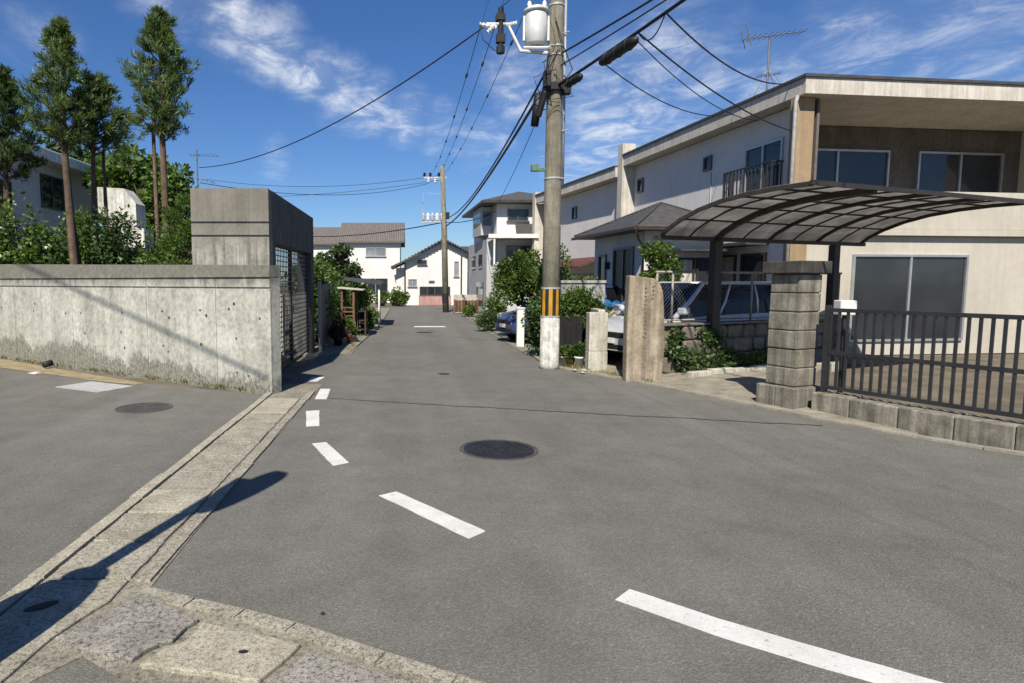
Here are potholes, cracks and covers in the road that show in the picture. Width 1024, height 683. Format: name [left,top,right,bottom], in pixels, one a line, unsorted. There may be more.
manhole cover [115,402,173,413]
manhole cover [460,439,538,460]
